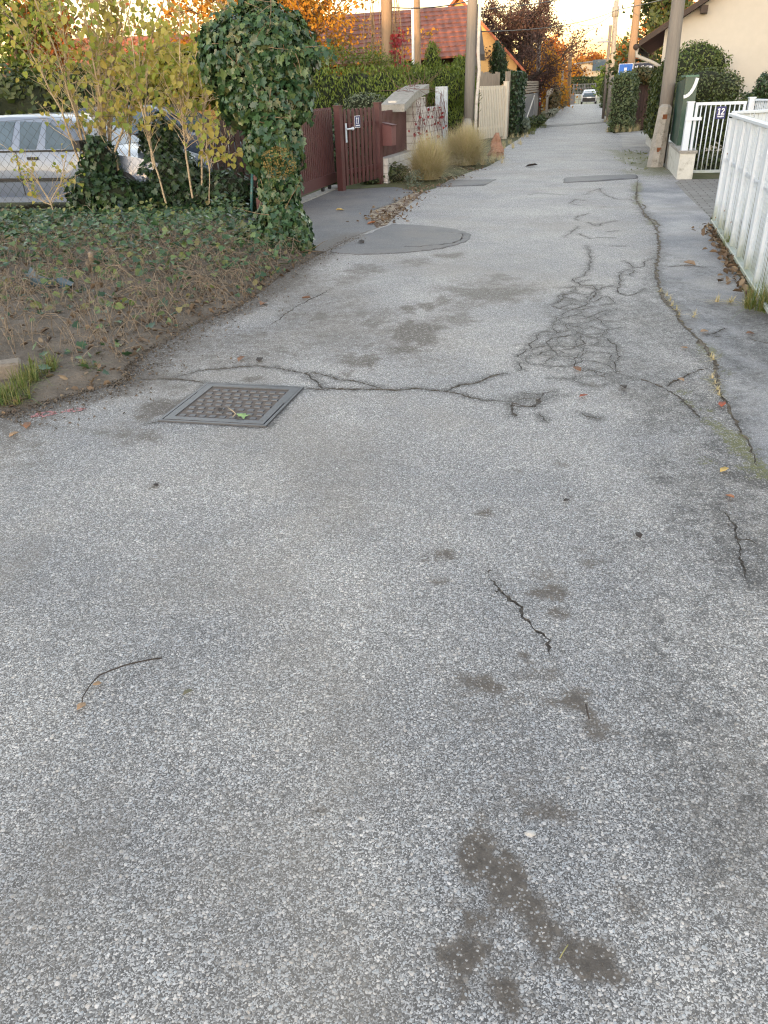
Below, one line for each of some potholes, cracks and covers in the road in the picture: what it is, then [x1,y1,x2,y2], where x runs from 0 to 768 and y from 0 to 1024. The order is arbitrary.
crack [641,368,707,418]
crack [718,506,756,580]
crack [488,570,552,655]
crack [139,188,655,421]
manhole cover [158,382,304,427]
